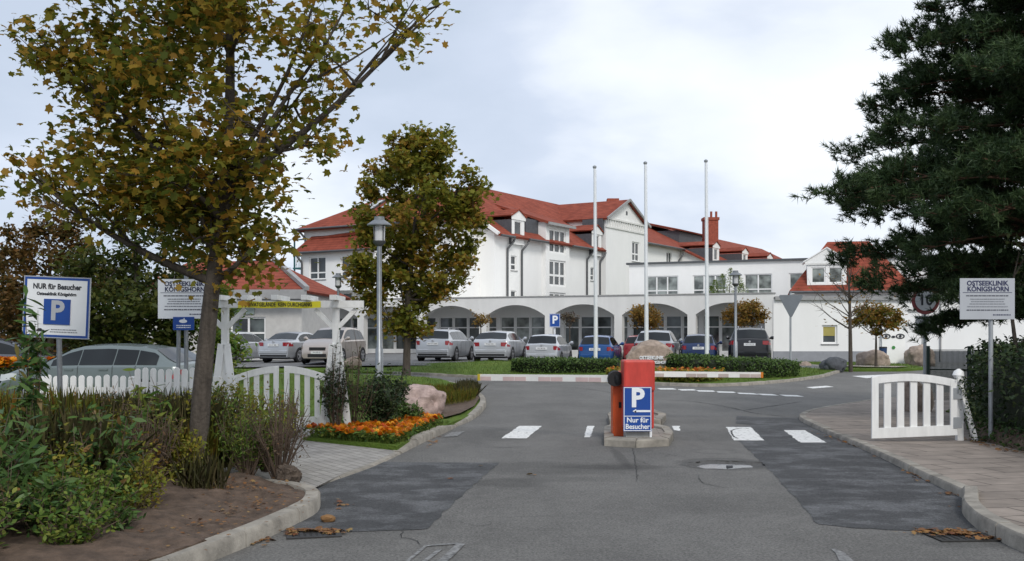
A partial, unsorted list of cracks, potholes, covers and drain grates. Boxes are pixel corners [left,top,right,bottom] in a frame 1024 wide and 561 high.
drain grate [920,531,1001,542]
drain grate [285,528,342,540]
